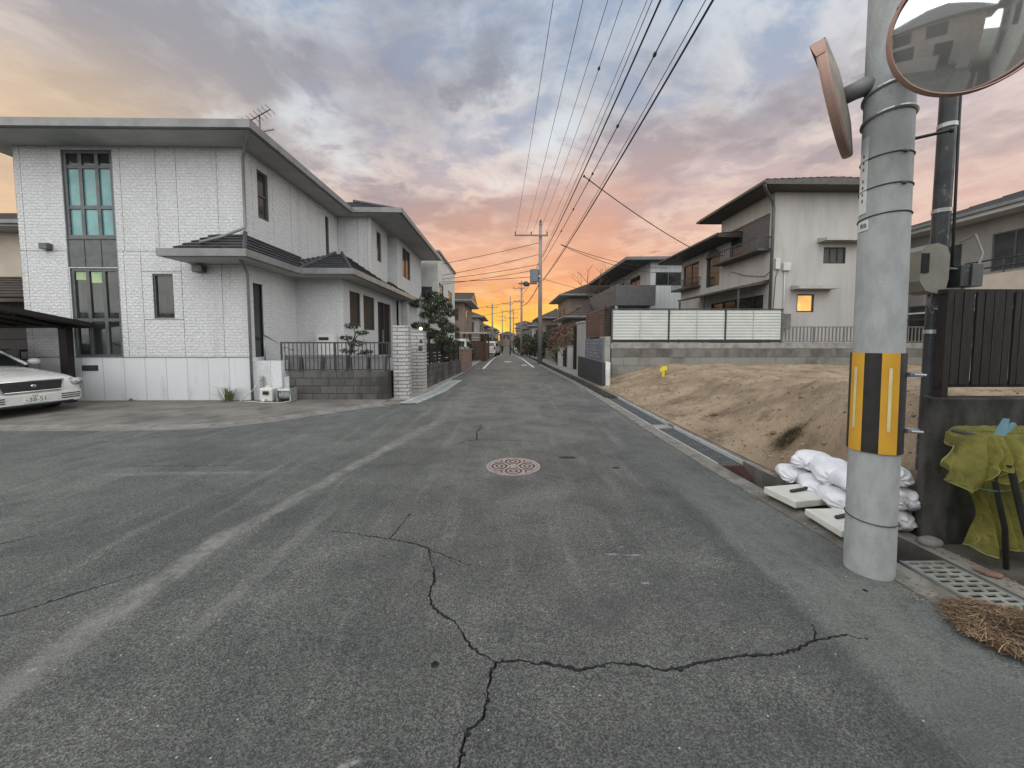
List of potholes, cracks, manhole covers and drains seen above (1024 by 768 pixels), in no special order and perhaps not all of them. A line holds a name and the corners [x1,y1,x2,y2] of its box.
manhole cover [486,458,540,476]
drain grate [656,426,743,473]
crack [332,512,870,768]
crack [1,572,144,616]
